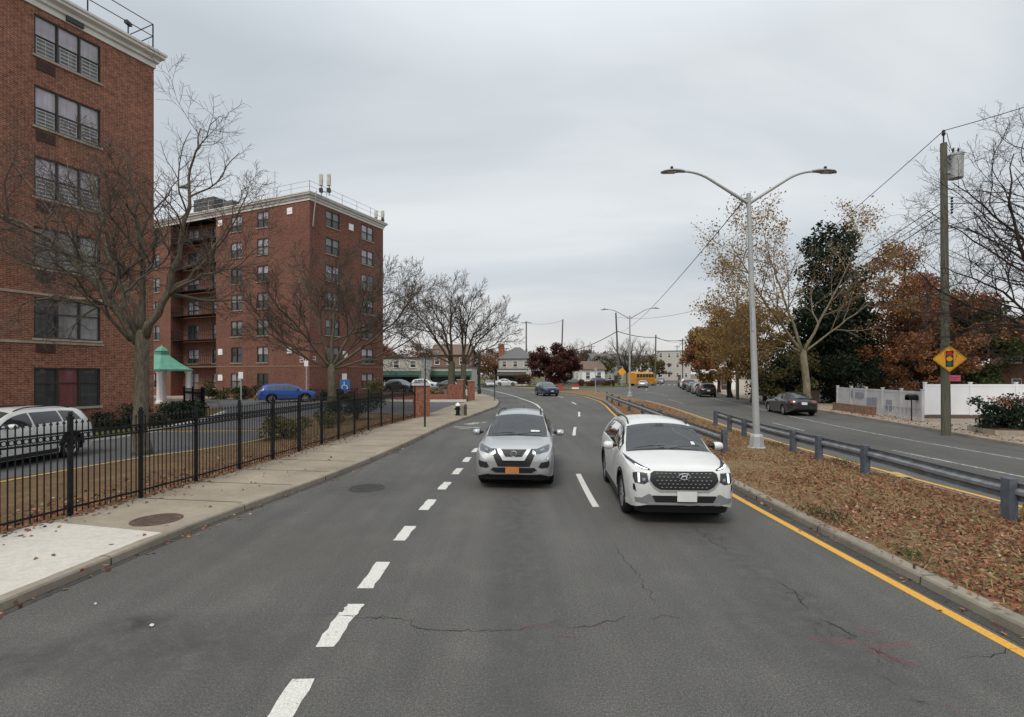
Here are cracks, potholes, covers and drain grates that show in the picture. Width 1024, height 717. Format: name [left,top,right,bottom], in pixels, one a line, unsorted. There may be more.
manhole cover [349,484,385,492]
manhole cover [129,513,184,527]
crack [691,526,926,702]
crack [297,613,629,631]
